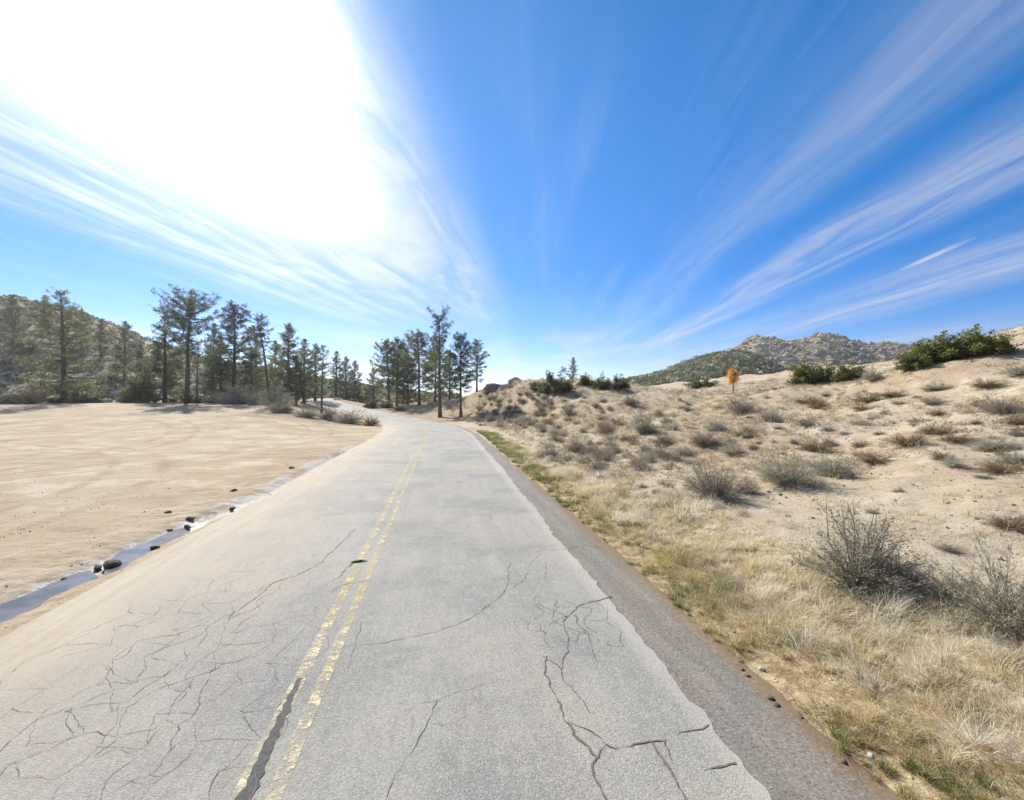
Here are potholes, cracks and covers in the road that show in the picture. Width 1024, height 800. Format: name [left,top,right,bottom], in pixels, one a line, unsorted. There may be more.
crack [229,529,369,617]
crack [344,545,596,661]
crack [524,594,737,800]
